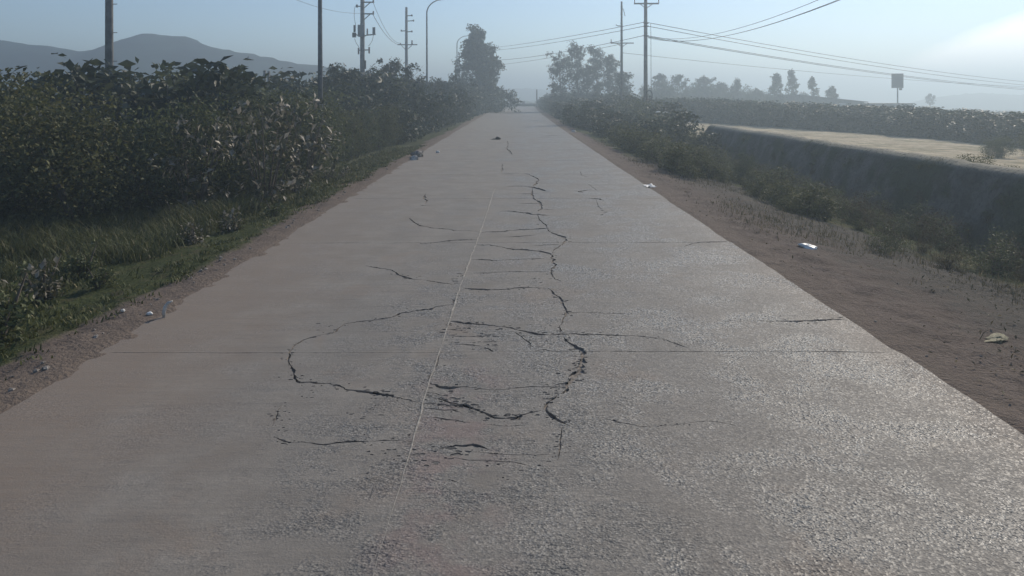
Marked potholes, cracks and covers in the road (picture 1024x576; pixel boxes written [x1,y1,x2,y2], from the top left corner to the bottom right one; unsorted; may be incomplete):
crack [267,174,687,482]
crack [600,417,742,429]
